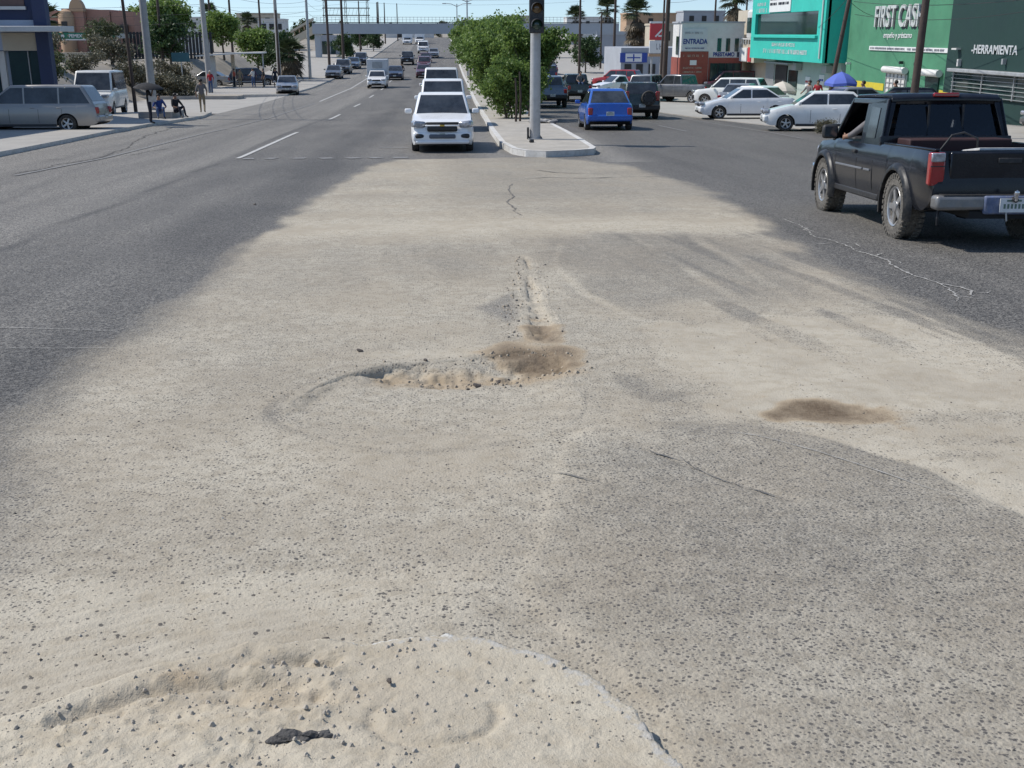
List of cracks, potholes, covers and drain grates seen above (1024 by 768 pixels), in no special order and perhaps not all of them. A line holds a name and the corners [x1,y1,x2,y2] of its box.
pothole [272,347,593,450]
crack [785,219,988,301]
crack [506,170,614,216]
crack [648,449,794,501]
